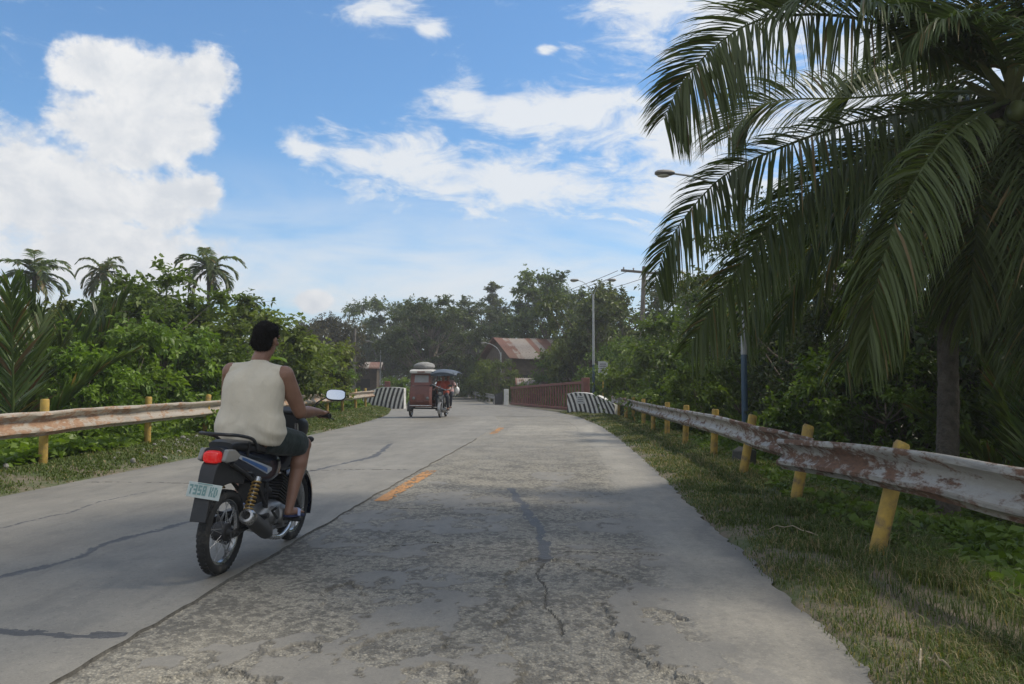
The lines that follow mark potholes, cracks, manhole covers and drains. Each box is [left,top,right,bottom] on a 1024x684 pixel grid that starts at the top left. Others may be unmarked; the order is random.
crack [535,563,566,637]
